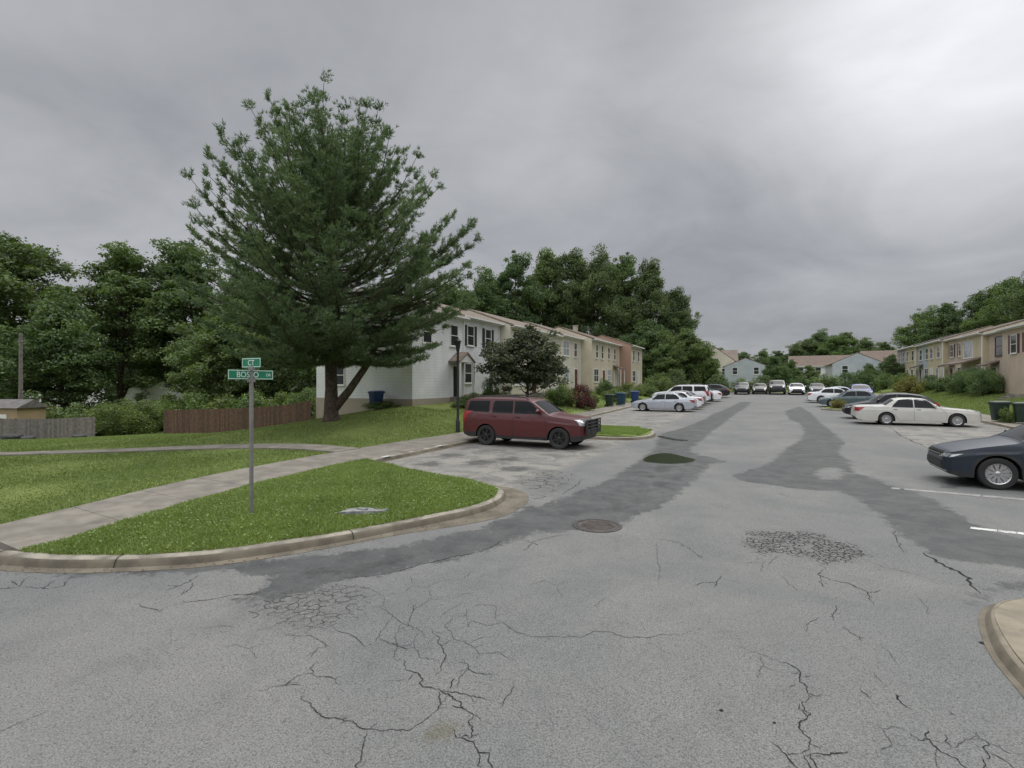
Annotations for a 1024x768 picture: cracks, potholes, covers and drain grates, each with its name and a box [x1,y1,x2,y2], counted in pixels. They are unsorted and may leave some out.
crack [744,530,879,604]
crack [740,645,848,768]
crack [876,724,1014,768]
crack [873,531,981,593]
crack [170,540,703,768]
manhole cover [572,519,622,533]
